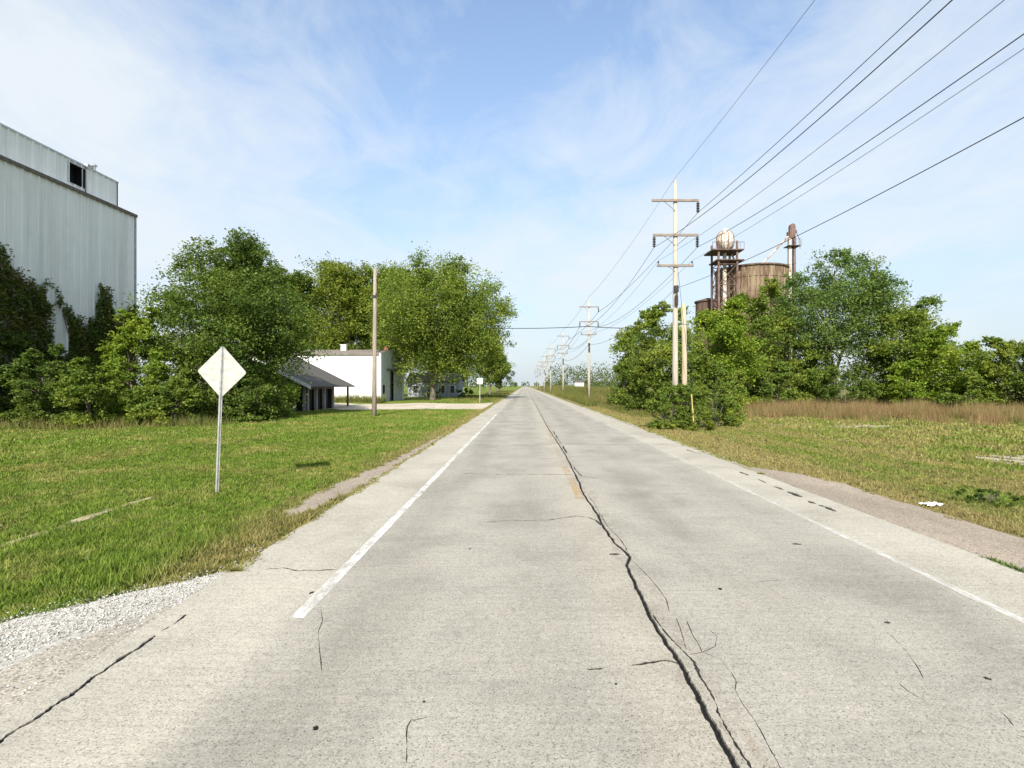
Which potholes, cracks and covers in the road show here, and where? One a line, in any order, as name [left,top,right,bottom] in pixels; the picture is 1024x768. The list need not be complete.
crack [406,717,426,763]
crack [463,397,837,768]
